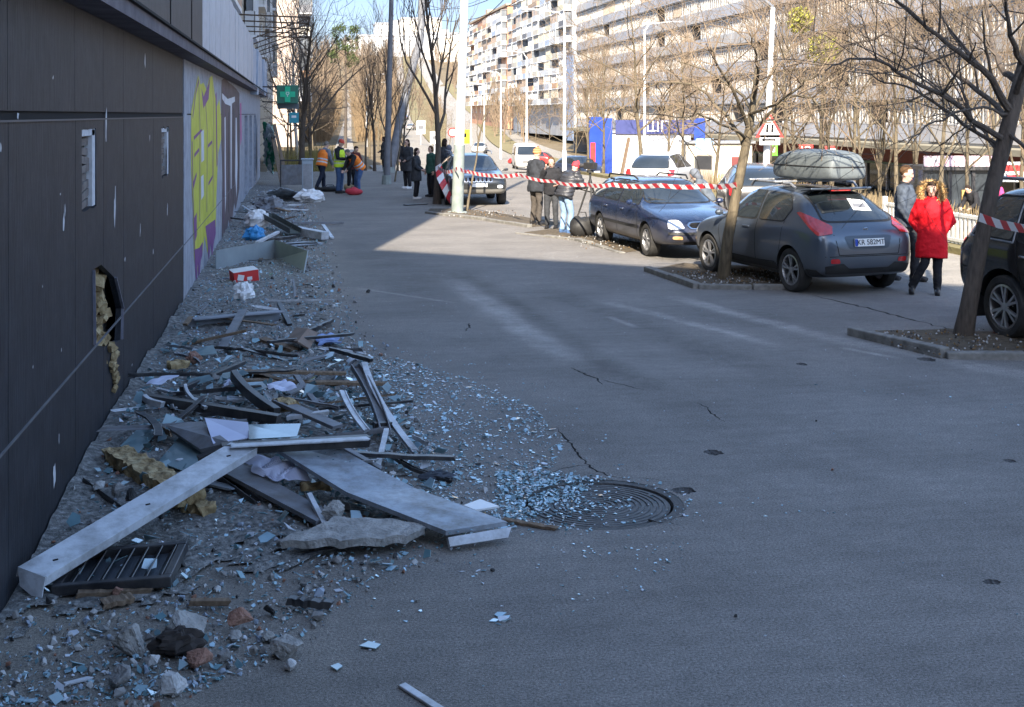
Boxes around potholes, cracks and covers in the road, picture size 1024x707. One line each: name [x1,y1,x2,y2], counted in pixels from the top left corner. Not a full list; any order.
manhole cover [515,479,686,530]
crack [551,429,661,481]
